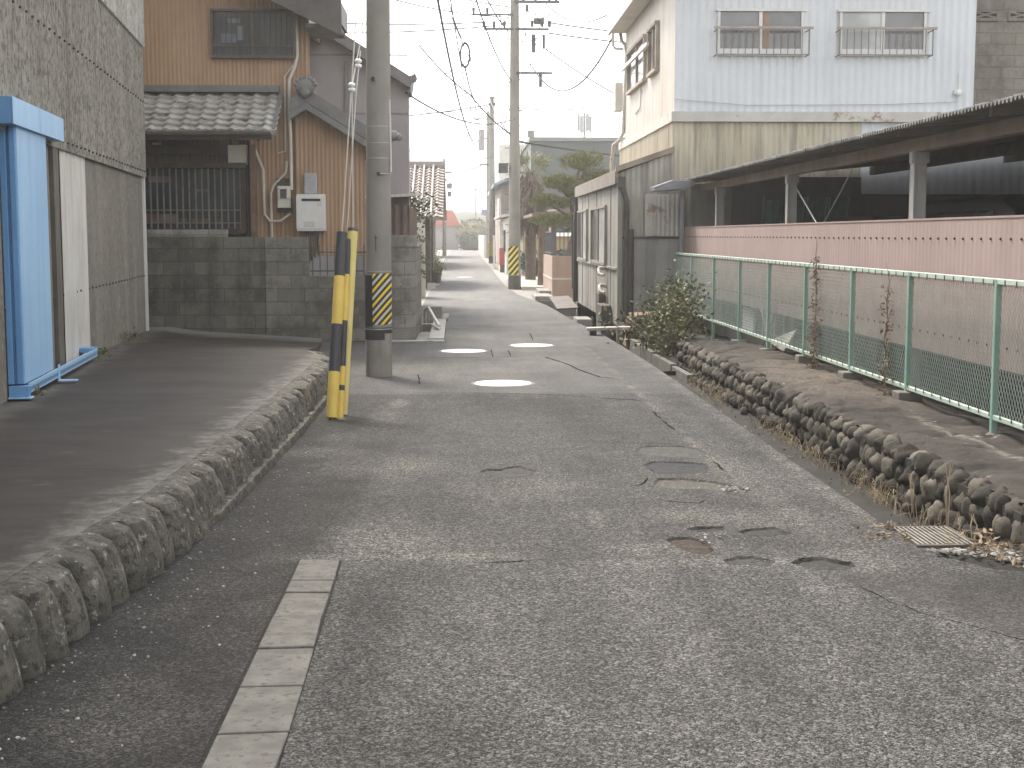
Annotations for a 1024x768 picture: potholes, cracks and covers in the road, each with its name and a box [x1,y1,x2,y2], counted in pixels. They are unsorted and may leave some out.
pothole [738,527,791,536]
pothole [480,466,537,478]
drain grate [893,526,979,549]
crack [607,398,675,444]
crack [861,587,1024,640]
pothole [791,556,855,571]
pothole [666,537,714,554]
pothole [723,556,775,566]
crack [545,357,608,378]
